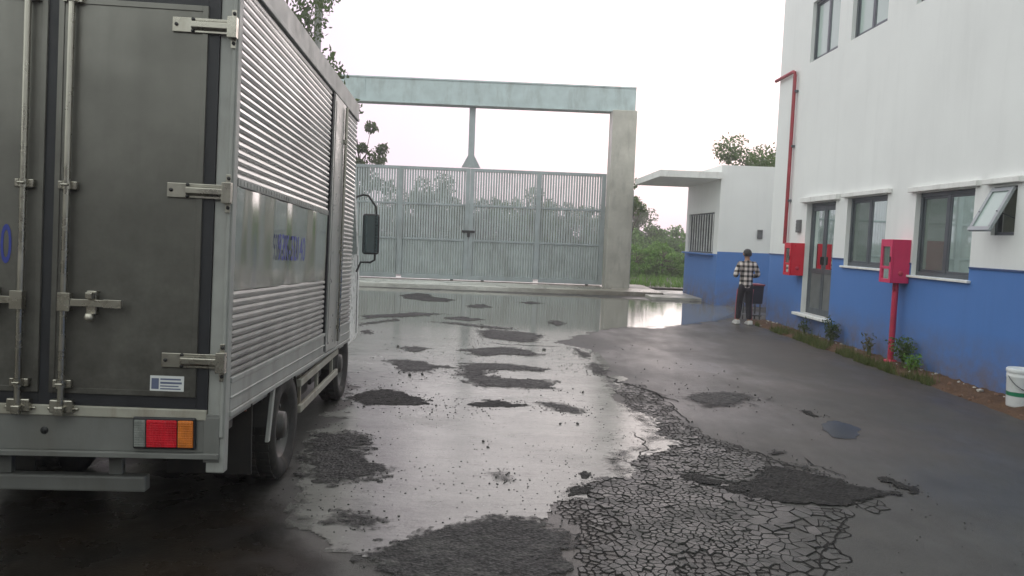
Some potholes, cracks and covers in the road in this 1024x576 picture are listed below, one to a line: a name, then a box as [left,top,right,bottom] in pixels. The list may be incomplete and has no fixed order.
pothole [878,476,920,493]
pothole [346,389,430,405]
pothole [459,347,545,357]
pothole [455,362,561,389]
pothole [476,329,543,342]
pothole [317,509,388,531]
pothole [349,514,586,576]
pothole [381,359,456,373]
pothole [468,399,528,408]
crack [555,375,891,576]
pothole [293,429,397,487]
pothole [402,293,455,302]
